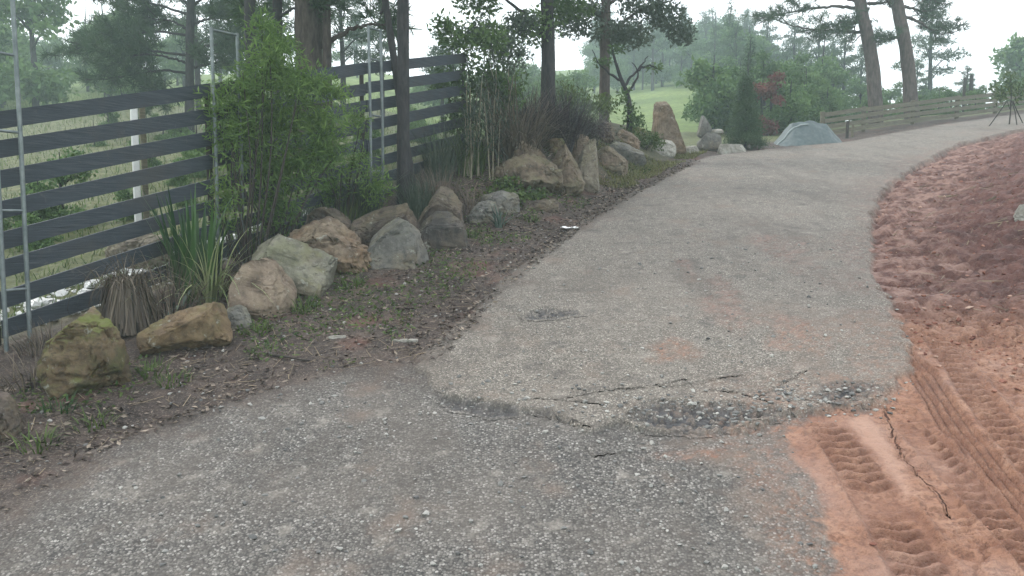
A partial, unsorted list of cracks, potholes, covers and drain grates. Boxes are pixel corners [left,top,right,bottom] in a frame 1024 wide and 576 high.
crack [529,370,807,427]
pothole [618,395,788,439]
crack [585,447,620,458]
pothole [800,376,890,415]
